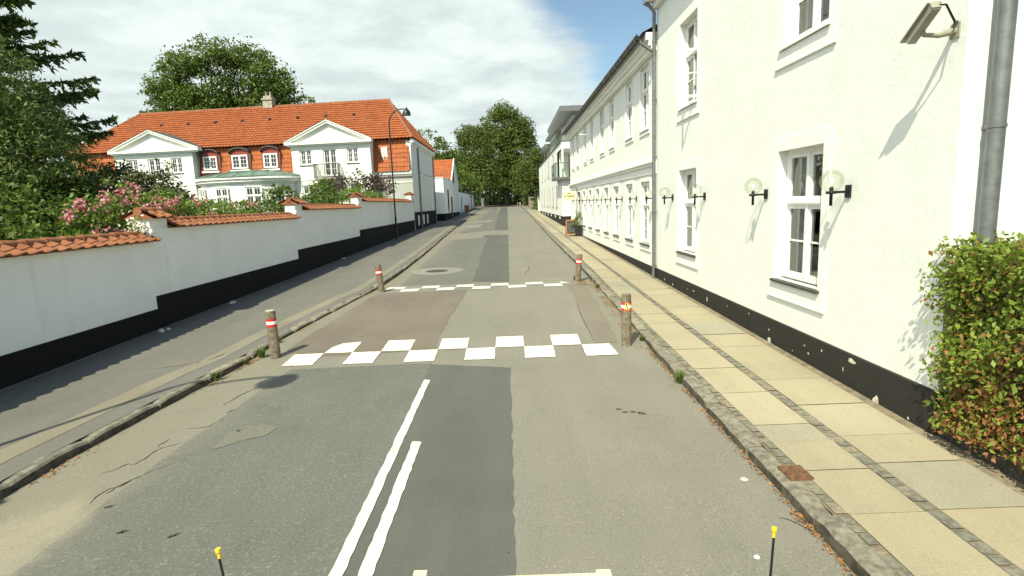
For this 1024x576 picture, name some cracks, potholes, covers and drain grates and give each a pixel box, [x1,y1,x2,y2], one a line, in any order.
crack [90,384,266,503]
